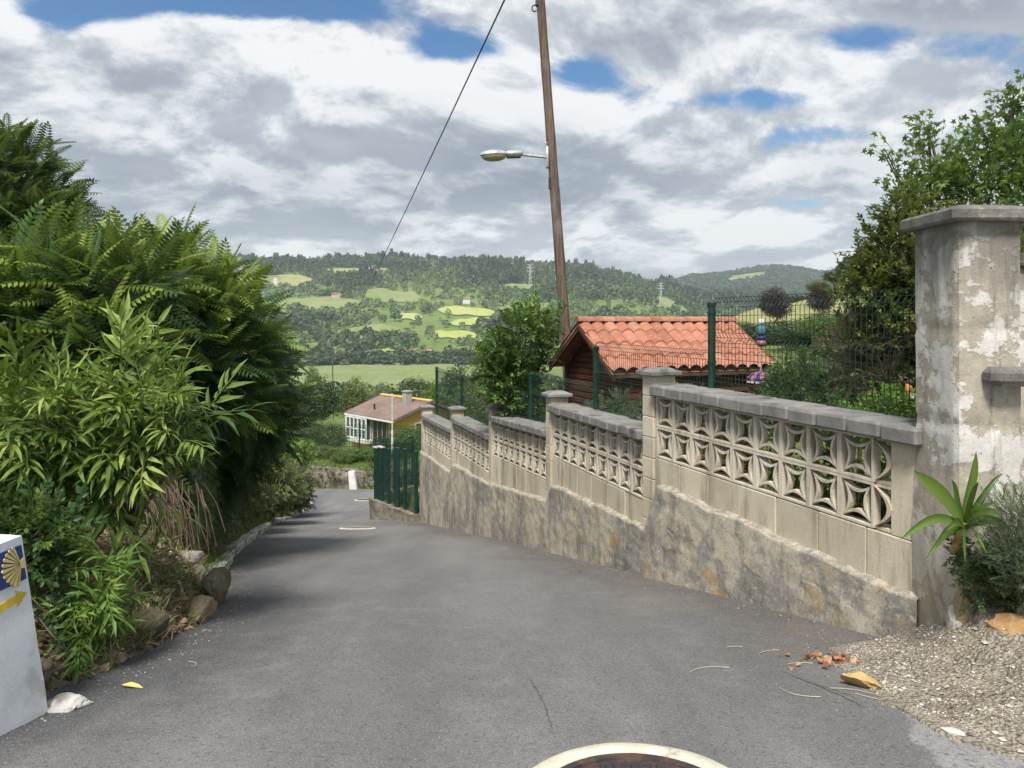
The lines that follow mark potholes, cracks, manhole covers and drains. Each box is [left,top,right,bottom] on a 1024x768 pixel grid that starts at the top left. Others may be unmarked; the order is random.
crack [527,674,554,732]
manhole cover [533,742,728,768]
